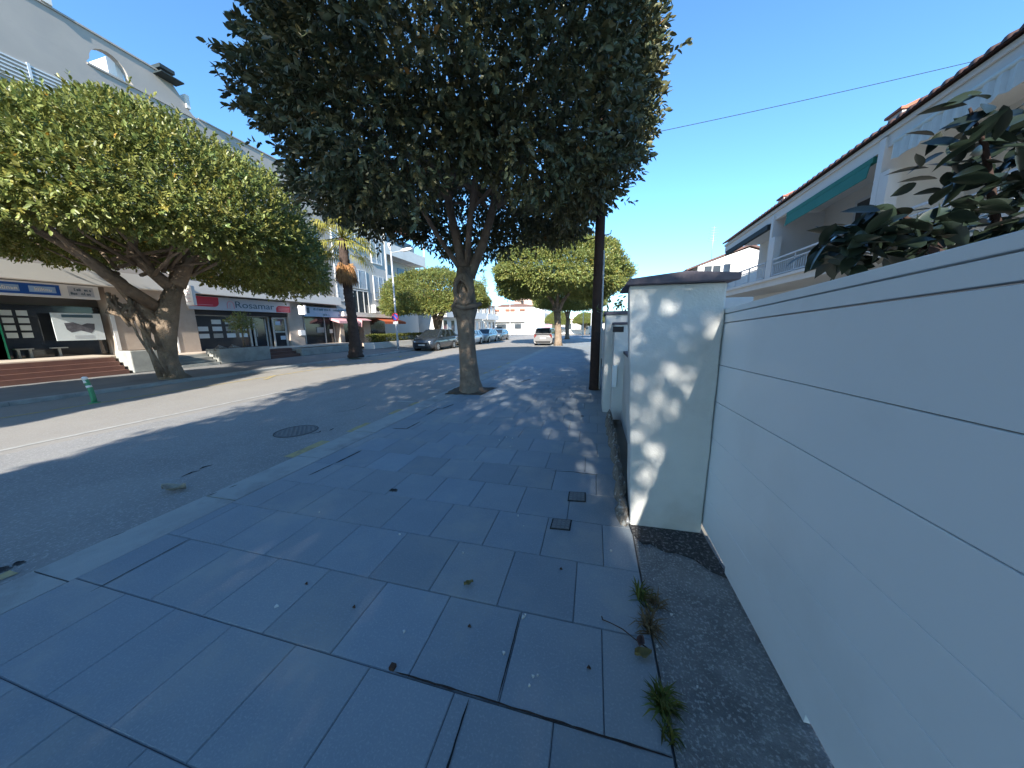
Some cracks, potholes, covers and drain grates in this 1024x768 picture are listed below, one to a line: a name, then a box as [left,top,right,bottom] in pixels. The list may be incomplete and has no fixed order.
utility cover [550,518,572,531]
manhole cover [273,425,319,438]
utility cover [568,491,586,502]
